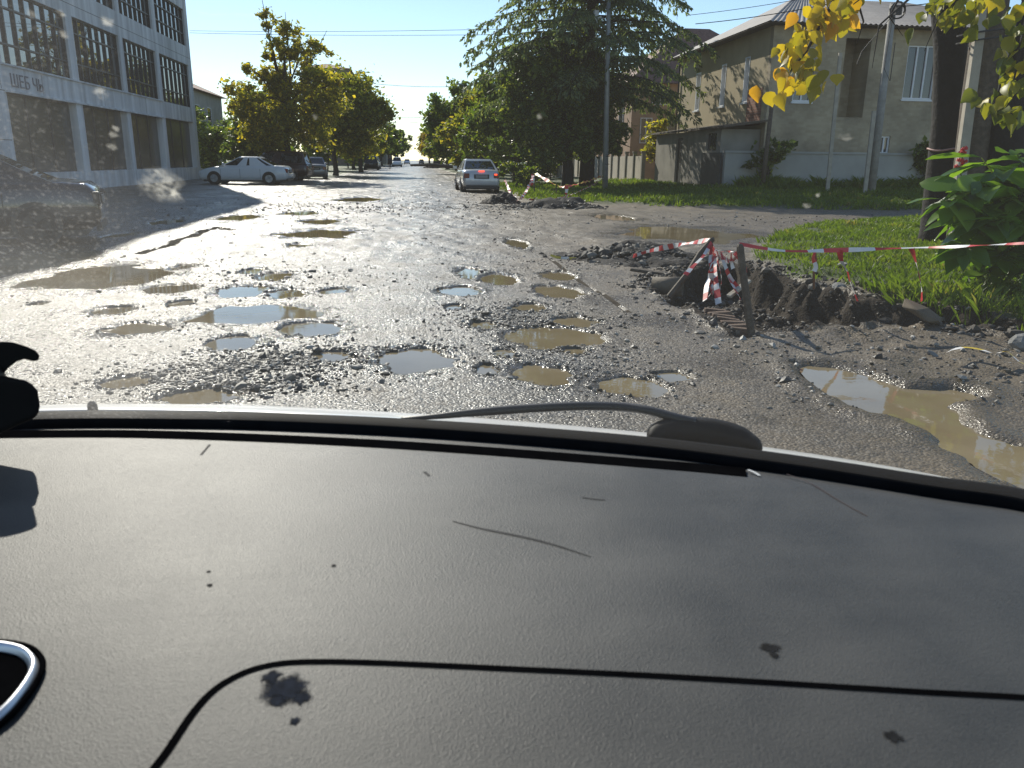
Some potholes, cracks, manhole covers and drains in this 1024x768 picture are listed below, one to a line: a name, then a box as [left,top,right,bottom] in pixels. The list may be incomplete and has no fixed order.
pothole [0,260,188,295]
pothole [264,318,360,341]
pothole [475,271,527,286]
pothole [466,319,503,330]
pothole [501,237,534,250]
pothole [535,269,583,281]
pothole [503,359,582,388]
pothole [525,283,597,299]
pothole [588,368,680,400]
pothole [785,357,1024,489]
pothole [430,284,487,296]
pothole [606,224,769,245]
